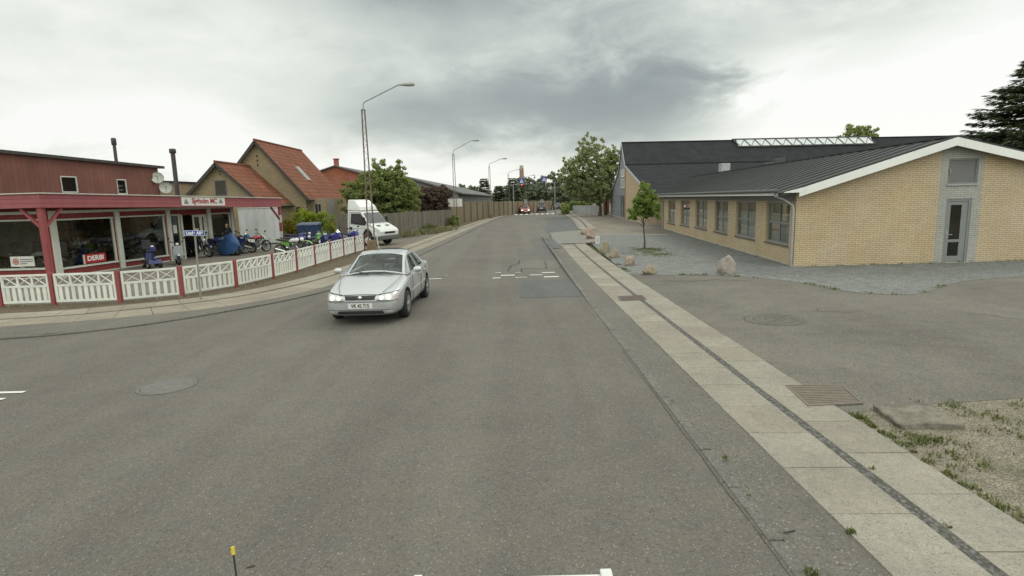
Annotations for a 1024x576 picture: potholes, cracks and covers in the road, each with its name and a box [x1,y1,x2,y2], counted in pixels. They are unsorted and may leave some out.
manhole cover [135,377,198,395]
